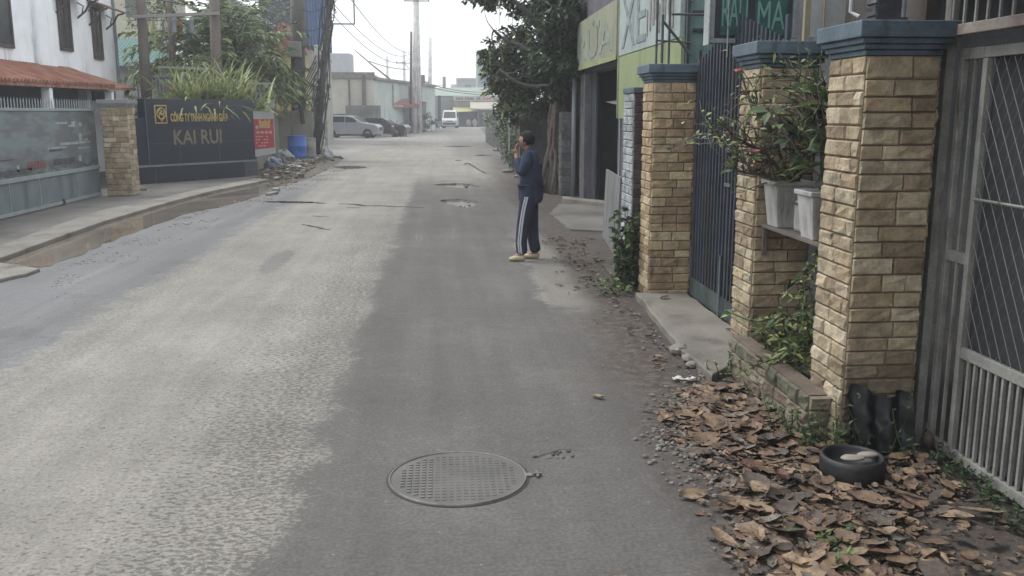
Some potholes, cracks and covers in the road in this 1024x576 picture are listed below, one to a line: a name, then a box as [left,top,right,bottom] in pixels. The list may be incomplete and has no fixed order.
pothole [440,199,481,208]
manhole cover [386,451,542,507]
crack [265,201,330,230]
